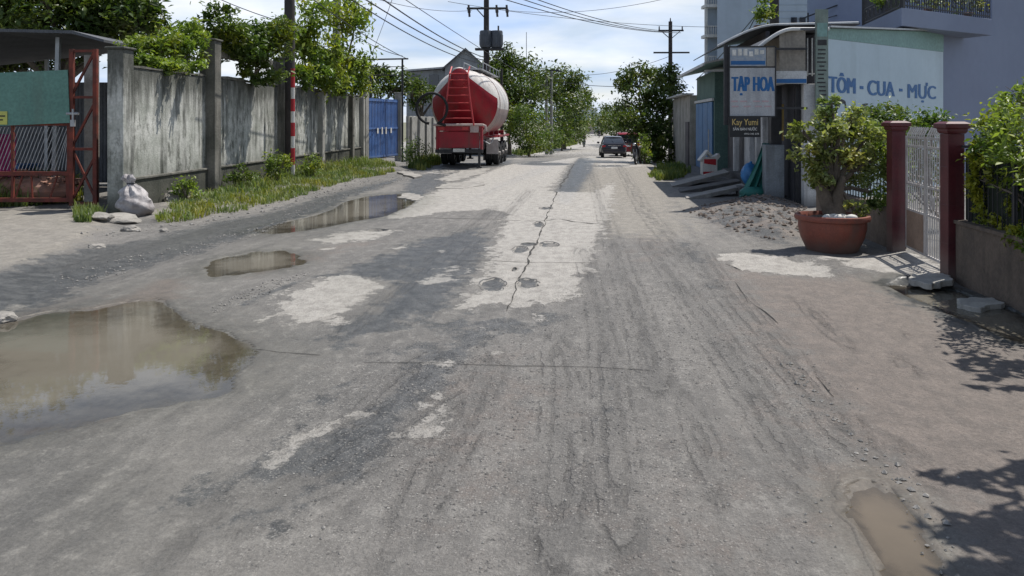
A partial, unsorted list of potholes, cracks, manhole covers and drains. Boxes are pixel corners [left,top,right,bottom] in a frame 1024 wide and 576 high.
pothole [510,246,529,254]
pothole [231,192,426,238]
pothole [831,467,959,576]
pothole [516,277,541,290]
pothole [189,247,316,281]
pothole [0,293,275,459]
crack [507,164,574,309]
pothole [476,277,508,293]
